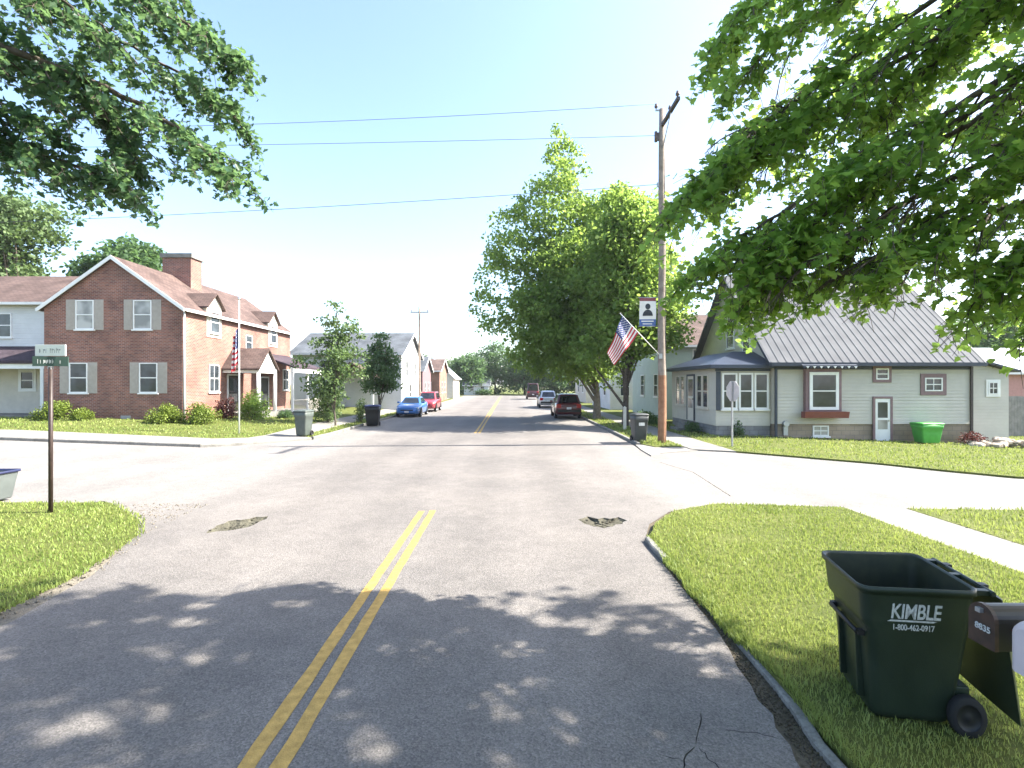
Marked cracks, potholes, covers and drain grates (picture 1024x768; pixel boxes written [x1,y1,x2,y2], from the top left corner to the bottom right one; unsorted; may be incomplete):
crack [663,716,719,768]
pothole [207,516,268,533]
pothole [578,516,627,528]
